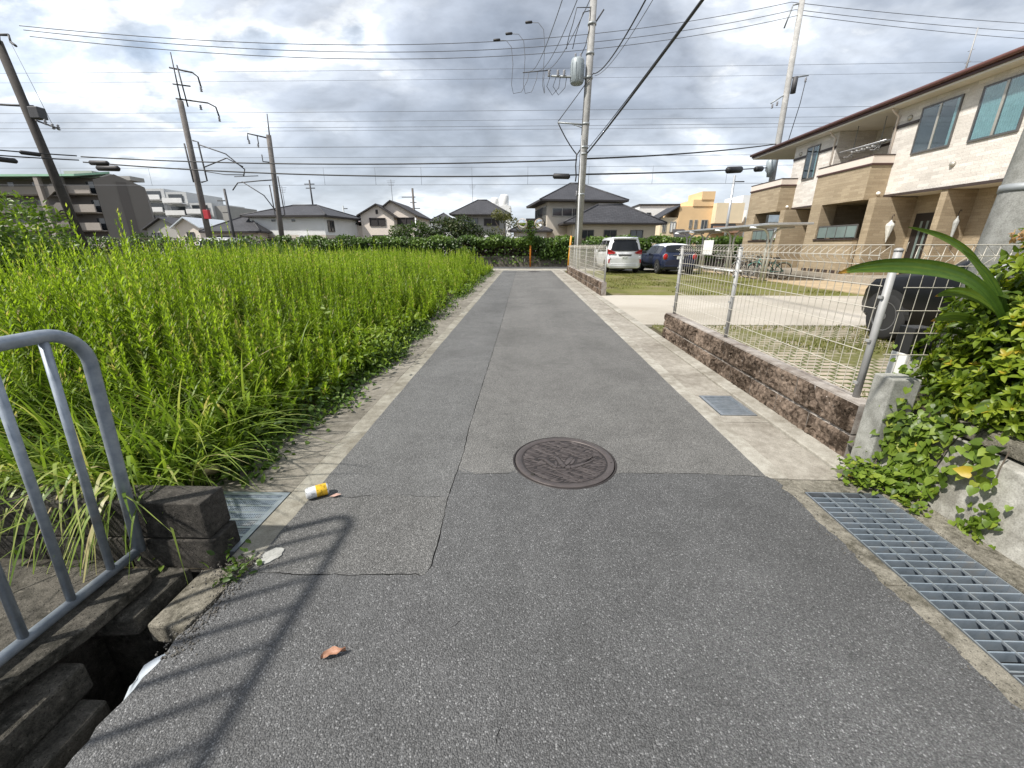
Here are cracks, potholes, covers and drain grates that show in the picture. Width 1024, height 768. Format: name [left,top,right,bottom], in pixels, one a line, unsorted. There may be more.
manhole cover [513,437,617,490]
drain grate [699,395,757,416]
drain grate [805,492,1024,676]
crack [259,280,514,576]
